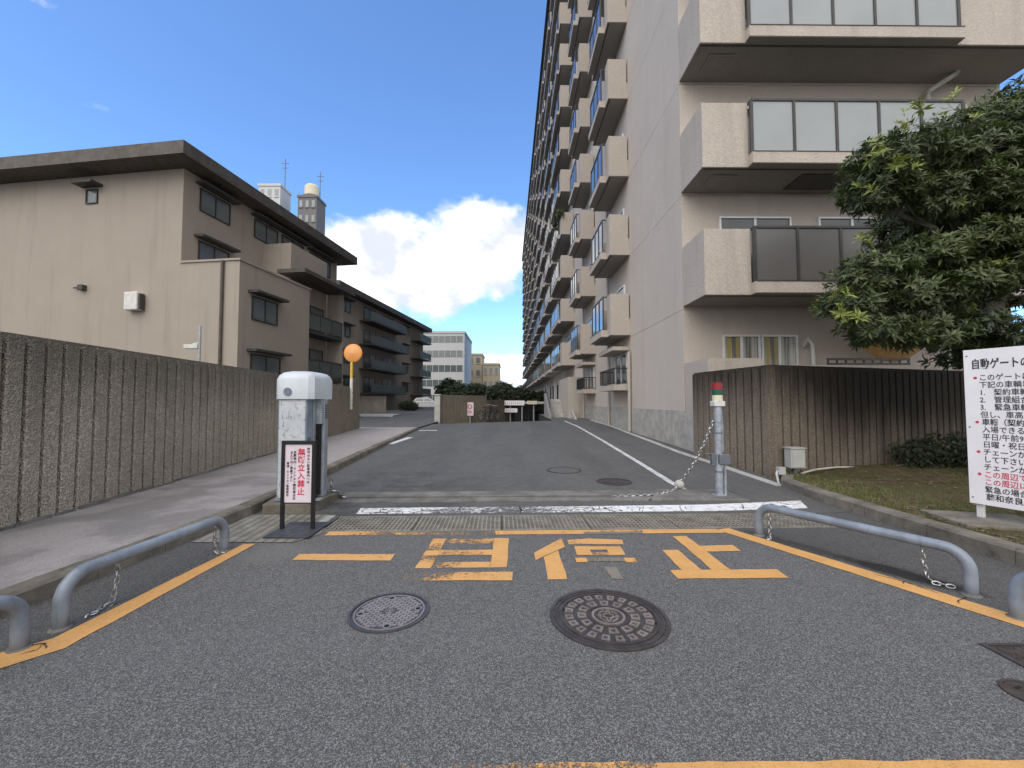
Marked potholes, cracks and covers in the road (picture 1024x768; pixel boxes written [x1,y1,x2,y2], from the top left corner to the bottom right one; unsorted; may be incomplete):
manhole cover [347,592,430,634]
drain grate [582,514,680,530]
drain grate [502,515,591,530]
drain grate [661,513,767,529]
manhole cover [596,478,632,486]
drain grate [322,516,421,532]
manhole cover [998,678,1024,702]
drain grate [739,513,835,528]
manhole cover [979,643,1024,668]
manhole cover [550,589,671,652]
drain grate [412,515,501,531]
